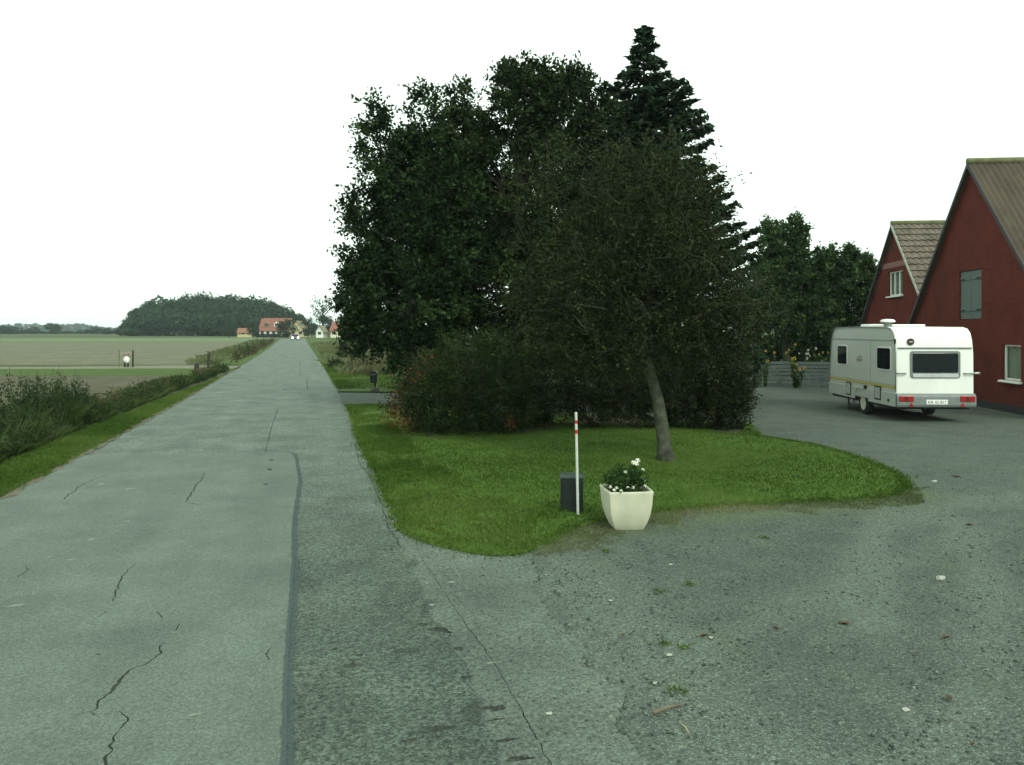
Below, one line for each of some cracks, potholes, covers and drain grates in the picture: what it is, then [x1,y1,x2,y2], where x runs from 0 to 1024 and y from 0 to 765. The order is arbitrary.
crack [75,612,179,765]
